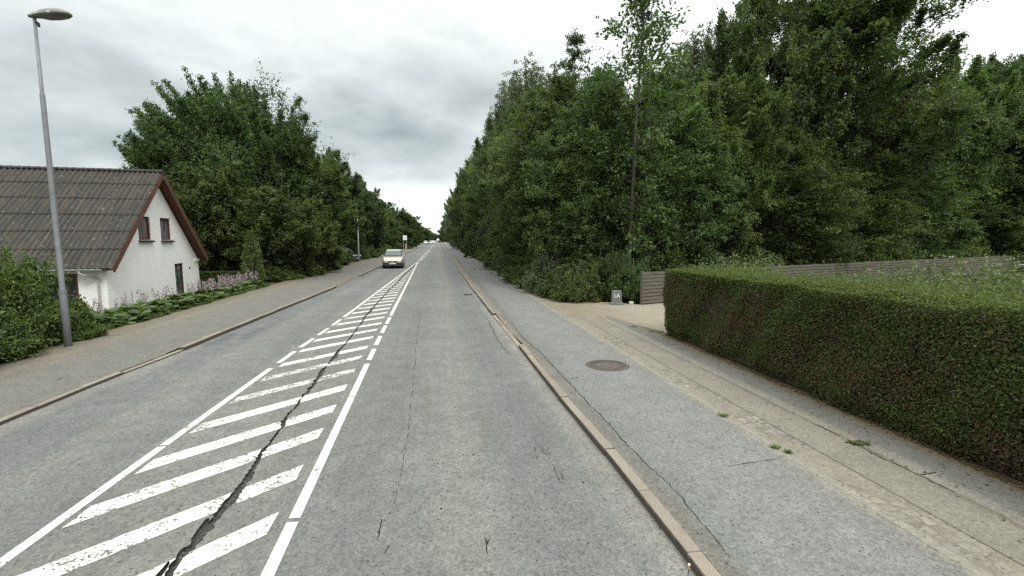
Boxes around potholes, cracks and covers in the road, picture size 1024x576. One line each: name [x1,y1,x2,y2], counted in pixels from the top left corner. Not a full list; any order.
crack [156,265,421,576]
manhole cover [586,360,629,371]
crack [486,317,731,558]
